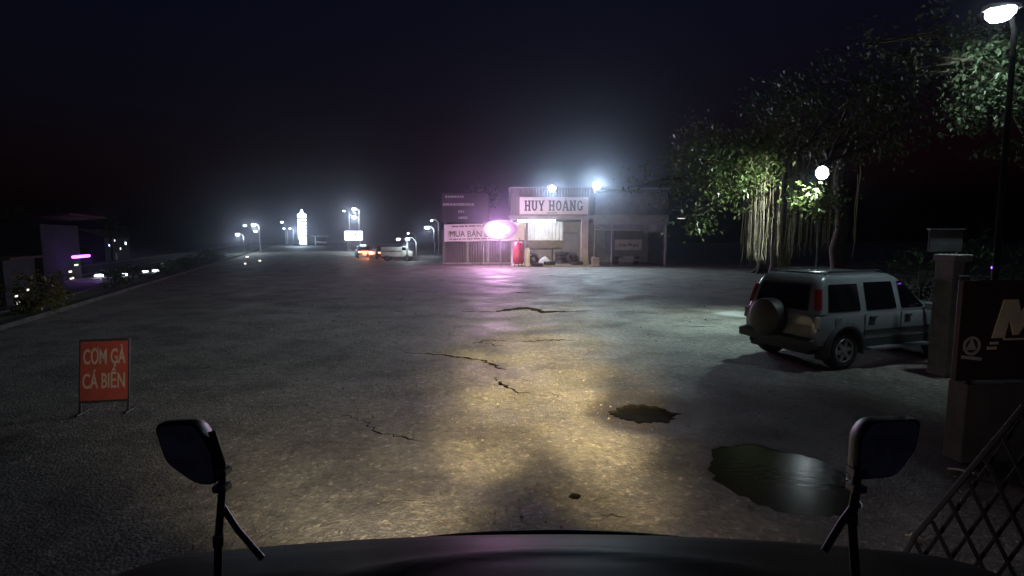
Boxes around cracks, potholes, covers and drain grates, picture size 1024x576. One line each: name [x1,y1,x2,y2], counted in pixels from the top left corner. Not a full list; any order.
crack [462,288,592,313]
pothole [608,404,681,424]
crack [420,339,571,397]
pothole [707,444,862,518]
crack [347,415,418,441]
